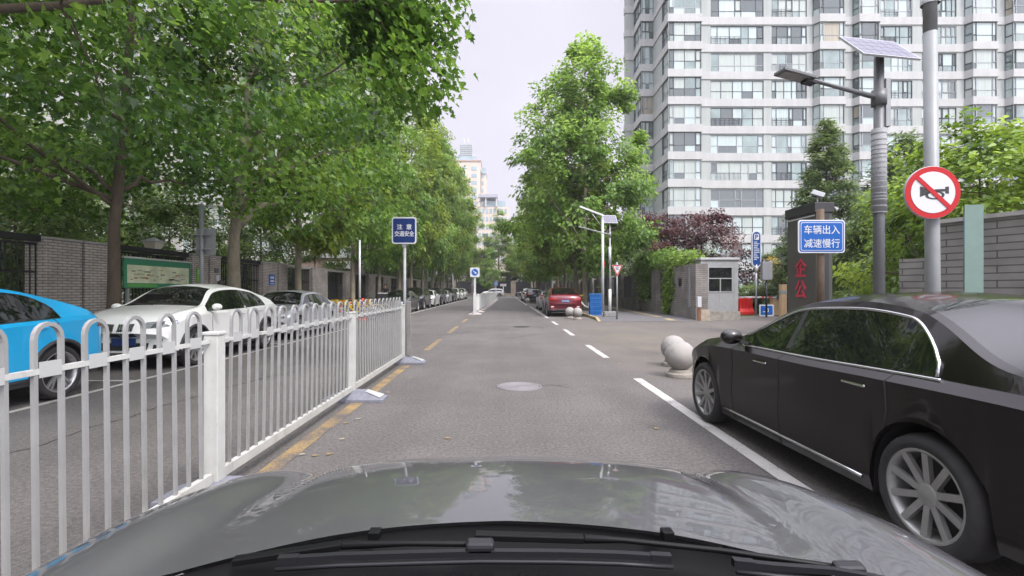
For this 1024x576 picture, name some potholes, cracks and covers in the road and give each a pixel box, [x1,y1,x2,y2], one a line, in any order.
manhole cover [497,382,542,391]
